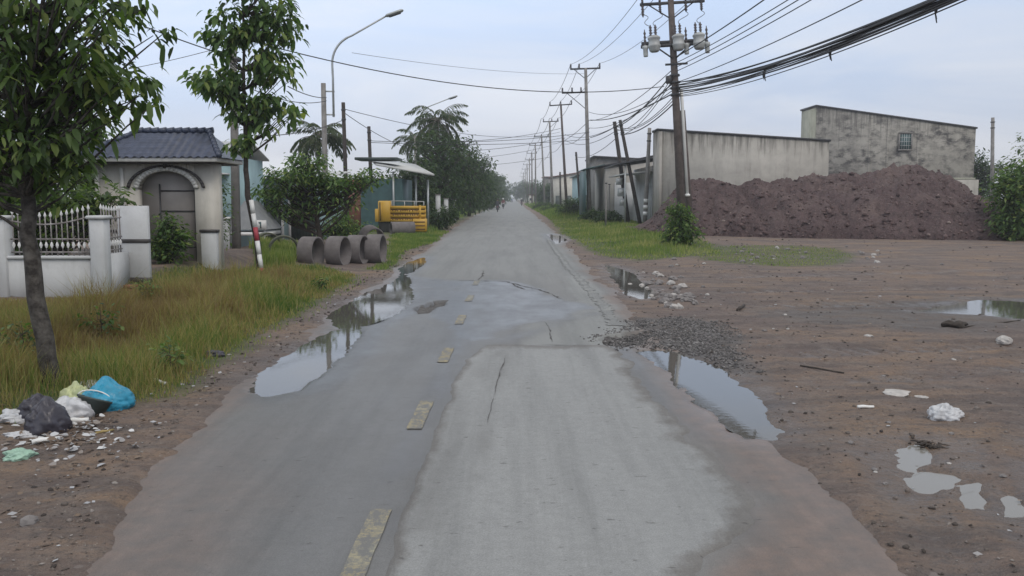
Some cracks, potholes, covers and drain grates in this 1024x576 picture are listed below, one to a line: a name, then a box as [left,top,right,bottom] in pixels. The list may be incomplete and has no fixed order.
crack [472,270,561,299]
pothole [416,302,446,314]
